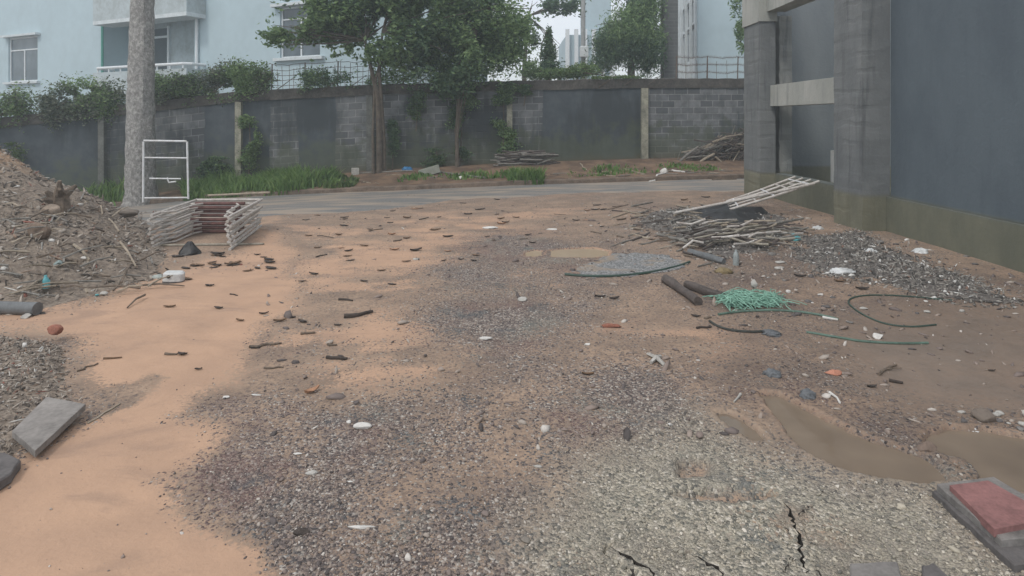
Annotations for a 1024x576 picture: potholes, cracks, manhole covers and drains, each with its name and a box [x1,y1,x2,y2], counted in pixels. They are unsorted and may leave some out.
pothole [701,404,780,448]
crack [605,543,663,576]
pothole [908,421,1024,494]
pothole [747,387,980,490]
crack [774,499,823,576]
crack [685,550,732,576]
